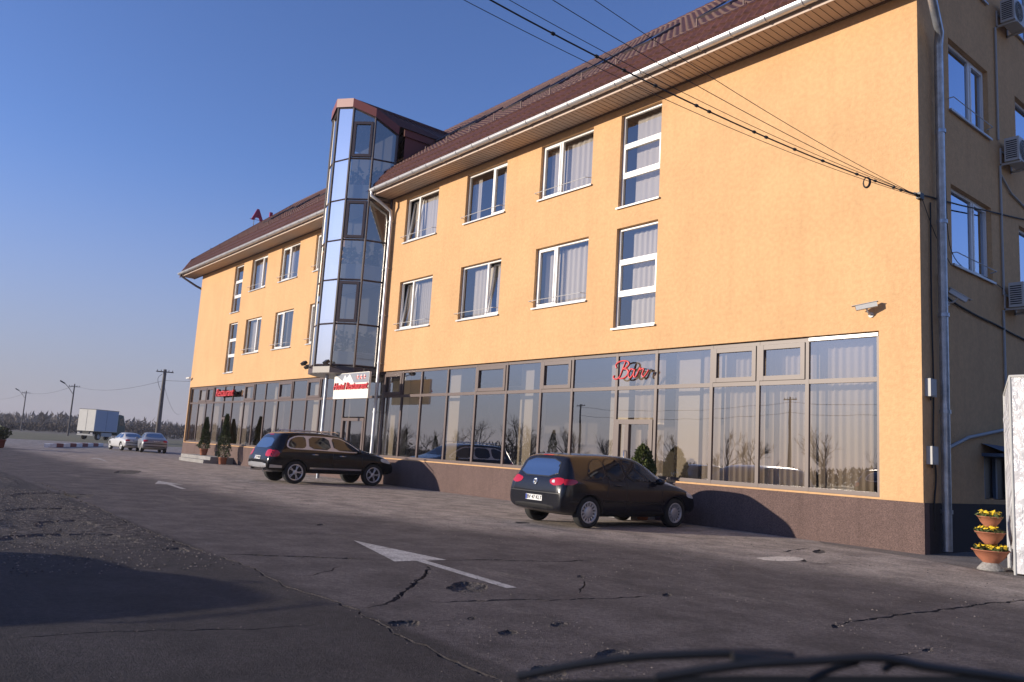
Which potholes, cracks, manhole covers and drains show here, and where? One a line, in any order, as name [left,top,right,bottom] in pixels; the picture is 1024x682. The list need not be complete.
crack [235,554,355,576]
crack [364,564,656,621]
pothole [446,581,488,593]
crack [841,600,1024,625]
